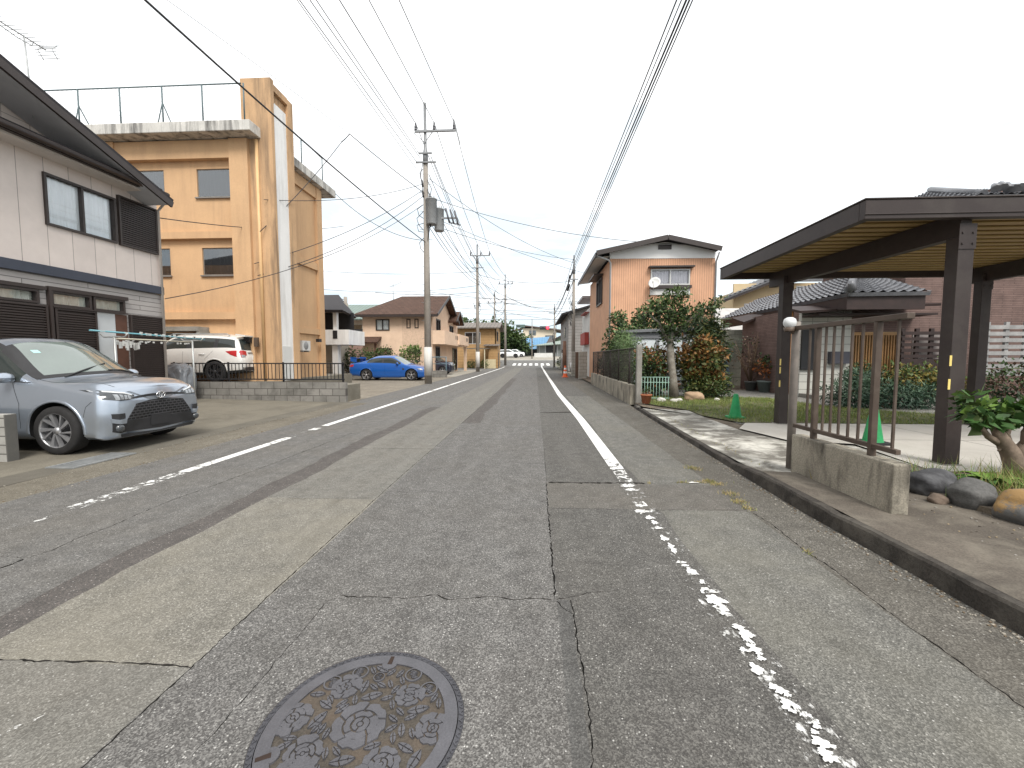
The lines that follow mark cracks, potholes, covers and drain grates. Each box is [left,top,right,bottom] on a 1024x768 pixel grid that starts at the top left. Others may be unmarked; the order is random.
crack [196,467,609,768]
manhole cover [244,652,464,768]
